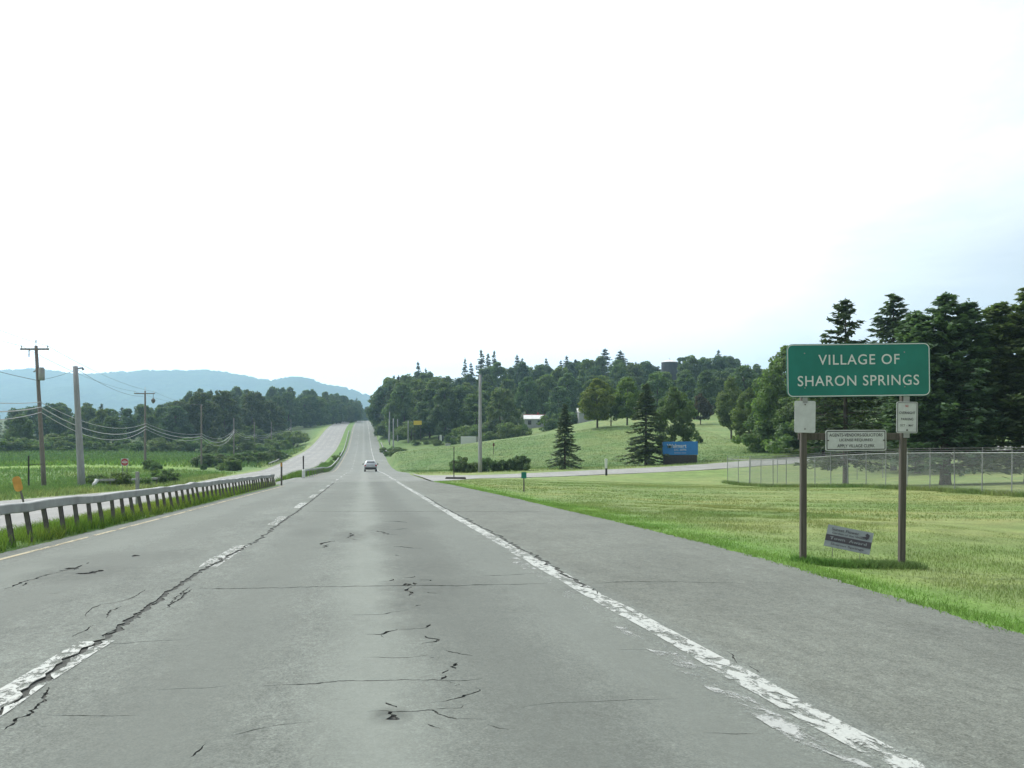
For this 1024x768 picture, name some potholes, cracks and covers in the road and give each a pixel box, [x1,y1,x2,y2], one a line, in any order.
crack [0,483,547,732]
crack [518,698,674,709]
